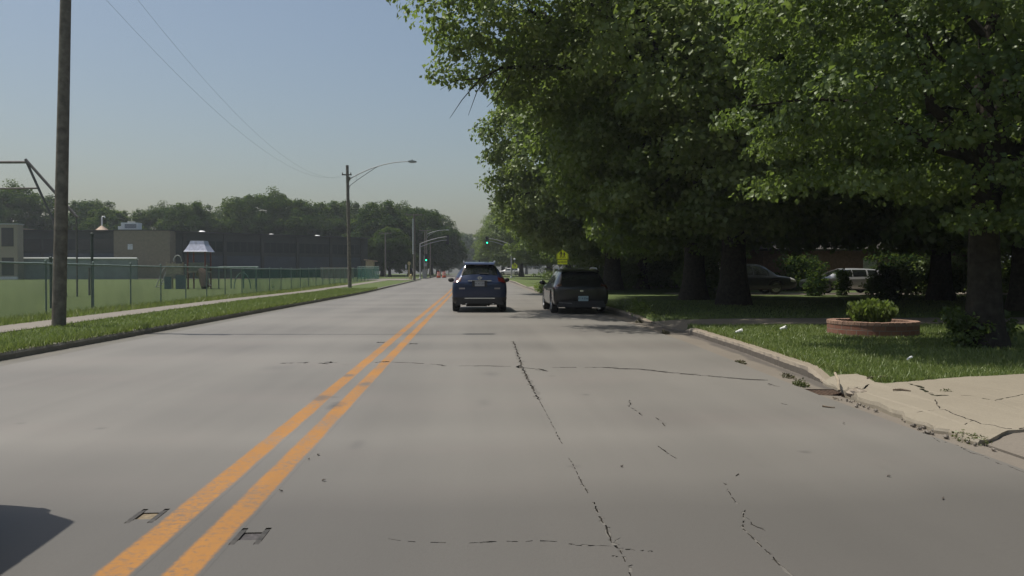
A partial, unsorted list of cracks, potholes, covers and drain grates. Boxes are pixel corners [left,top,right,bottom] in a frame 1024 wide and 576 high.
crack [388,341,653,576]
drain grate [806,389,843,397]
crack [724,474,794,576]
